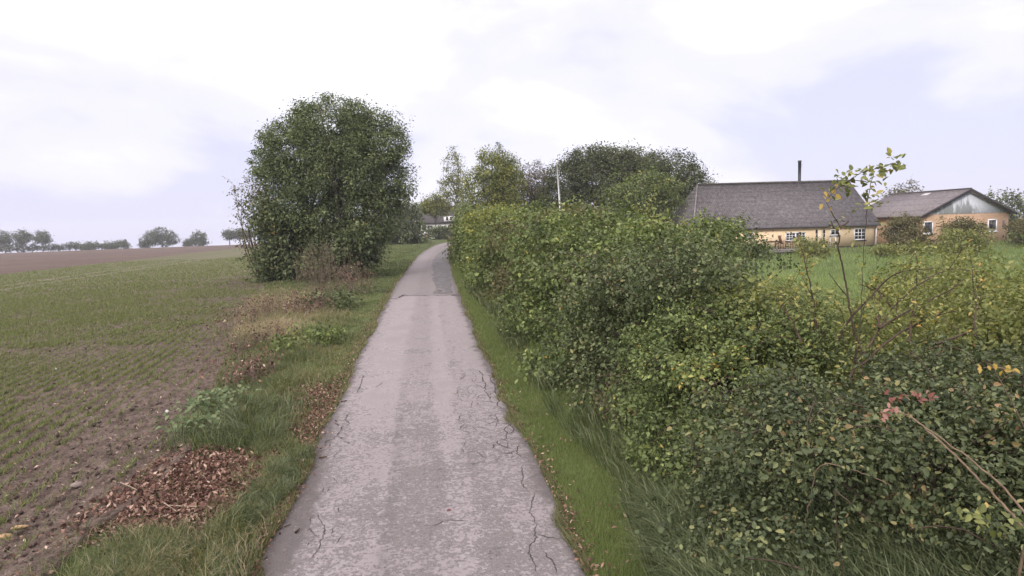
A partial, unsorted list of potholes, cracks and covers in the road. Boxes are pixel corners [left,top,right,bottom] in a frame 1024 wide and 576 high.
crack [308,414,351,555]
crack [457,370,560,571]
